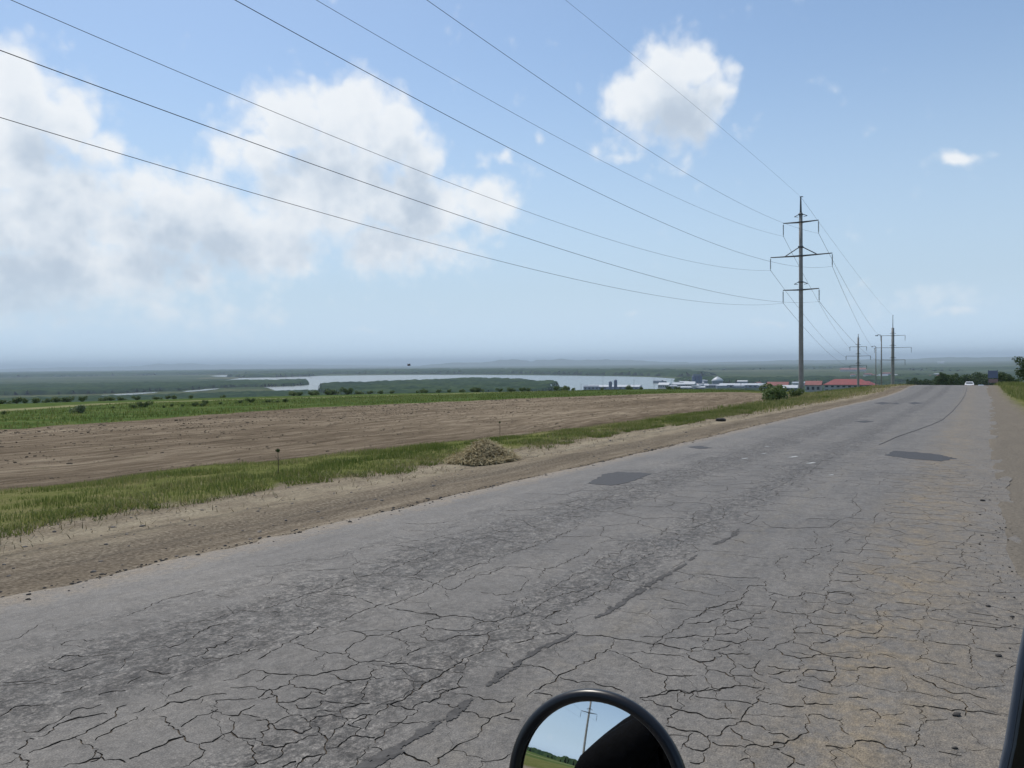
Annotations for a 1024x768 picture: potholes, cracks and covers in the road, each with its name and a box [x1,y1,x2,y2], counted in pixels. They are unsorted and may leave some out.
crack [1,439,1021,768]
